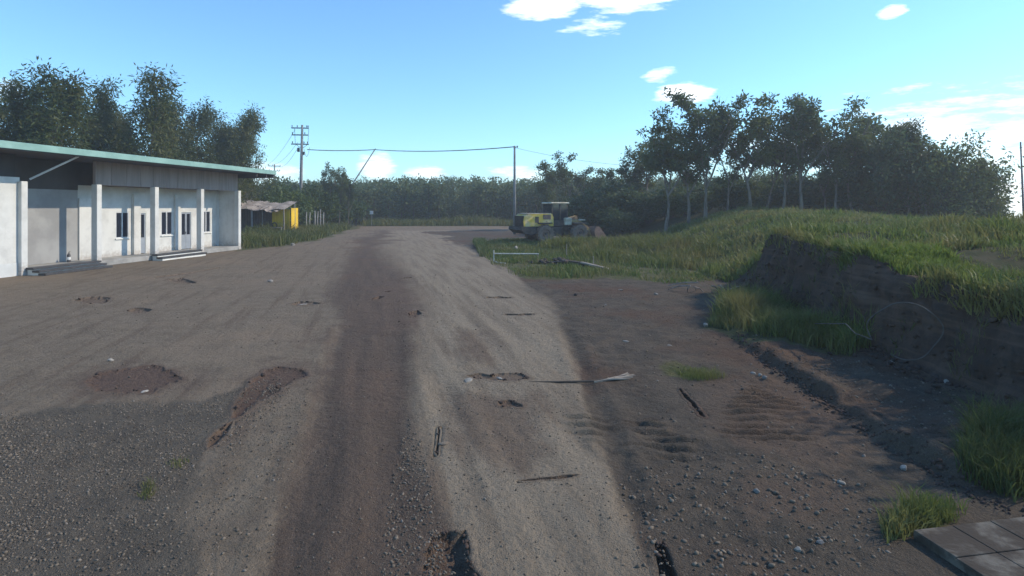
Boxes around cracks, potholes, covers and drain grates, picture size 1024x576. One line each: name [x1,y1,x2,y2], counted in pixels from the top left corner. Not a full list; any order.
pothole [227,365,313,421]
pothole [461,372,535,383]
pothole [646,537,686,576]
pothole [493,398,527,409]
pothole [412,526,490,576]
pothole [202,420,235,450]
pothole [74,363,189,397]
pothole [68,295,116,305]
